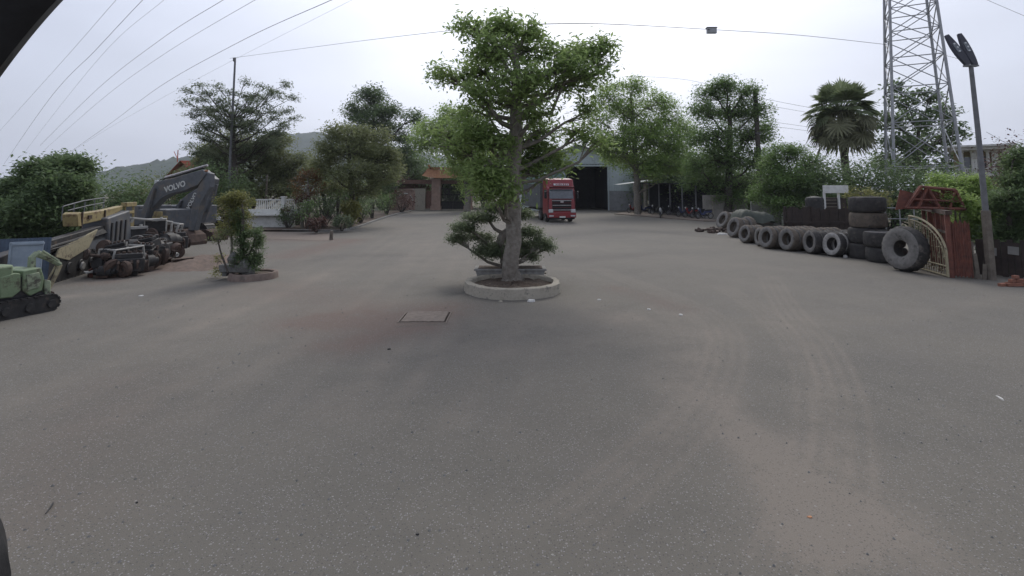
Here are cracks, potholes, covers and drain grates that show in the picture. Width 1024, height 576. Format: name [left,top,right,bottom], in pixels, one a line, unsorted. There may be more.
manhole cover [396,311,452,323]
